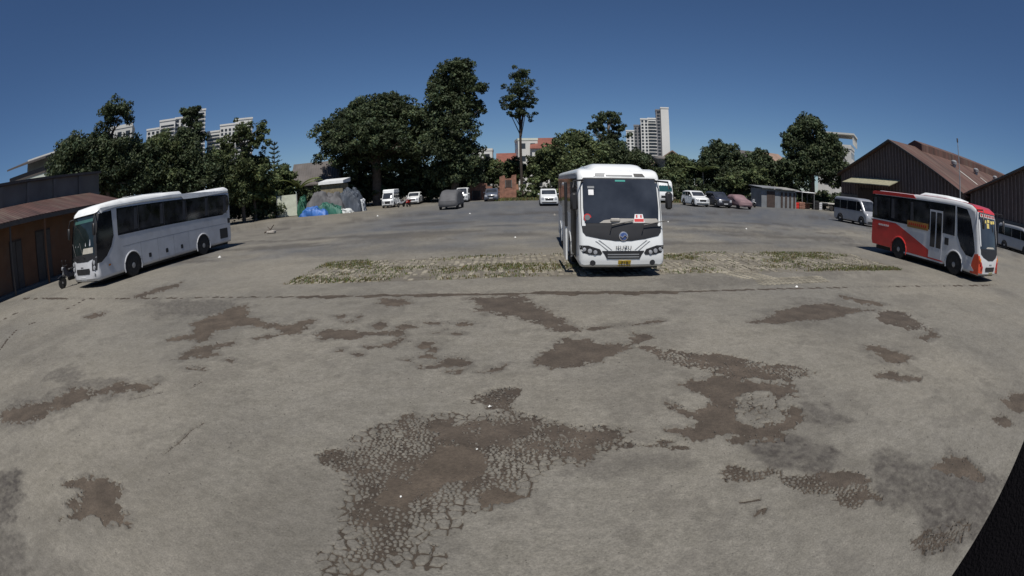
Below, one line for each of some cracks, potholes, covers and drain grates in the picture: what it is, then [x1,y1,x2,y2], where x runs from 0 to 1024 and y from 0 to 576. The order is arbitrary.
pothole [930,455,985,483]
pothole [59,475,132,528]
pothole [418,357,472,375]
pothole [873,371,922,382]
pothole [312,329,406,350]
pothole [166,305,317,343]
pothole [461,294,581,333]
pothole [533,332,656,370]
crack [721,465,882,517]
pothole [746,303,875,324]
crack [910,519,971,556]
pothole [864,345,913,365]
